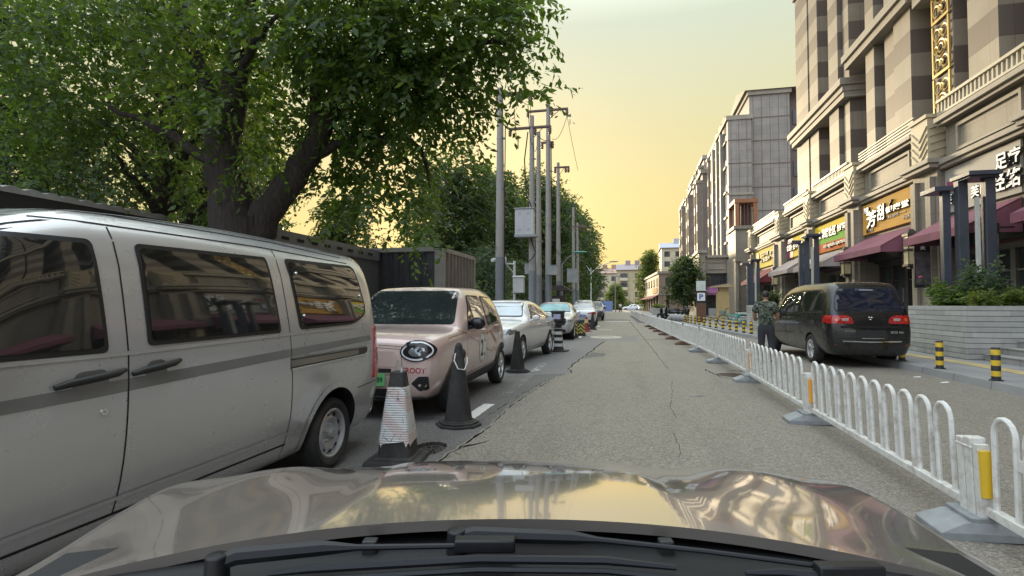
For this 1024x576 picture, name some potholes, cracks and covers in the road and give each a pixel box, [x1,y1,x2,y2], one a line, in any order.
pothole [417,442,447,454]
